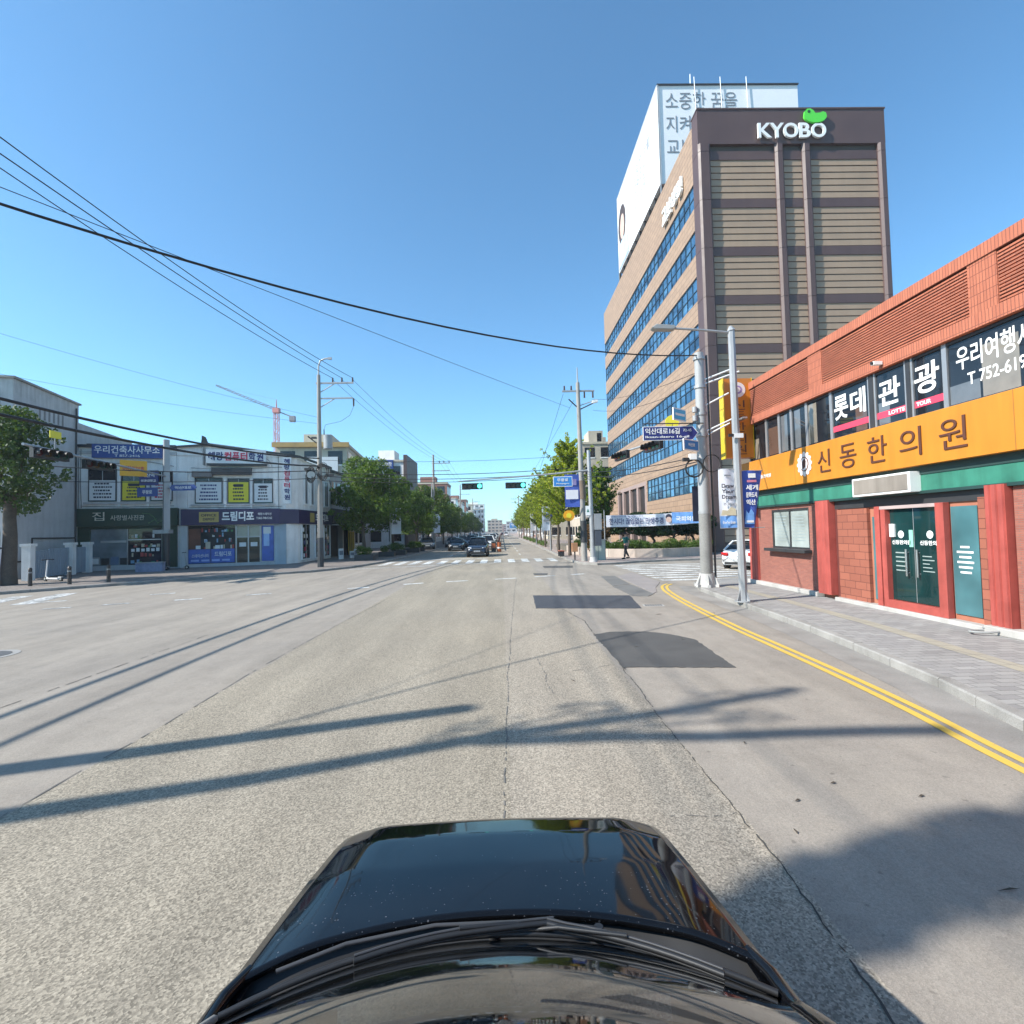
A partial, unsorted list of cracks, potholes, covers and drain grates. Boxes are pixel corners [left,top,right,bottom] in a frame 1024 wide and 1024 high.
manhole cover [0,649,21,658]
